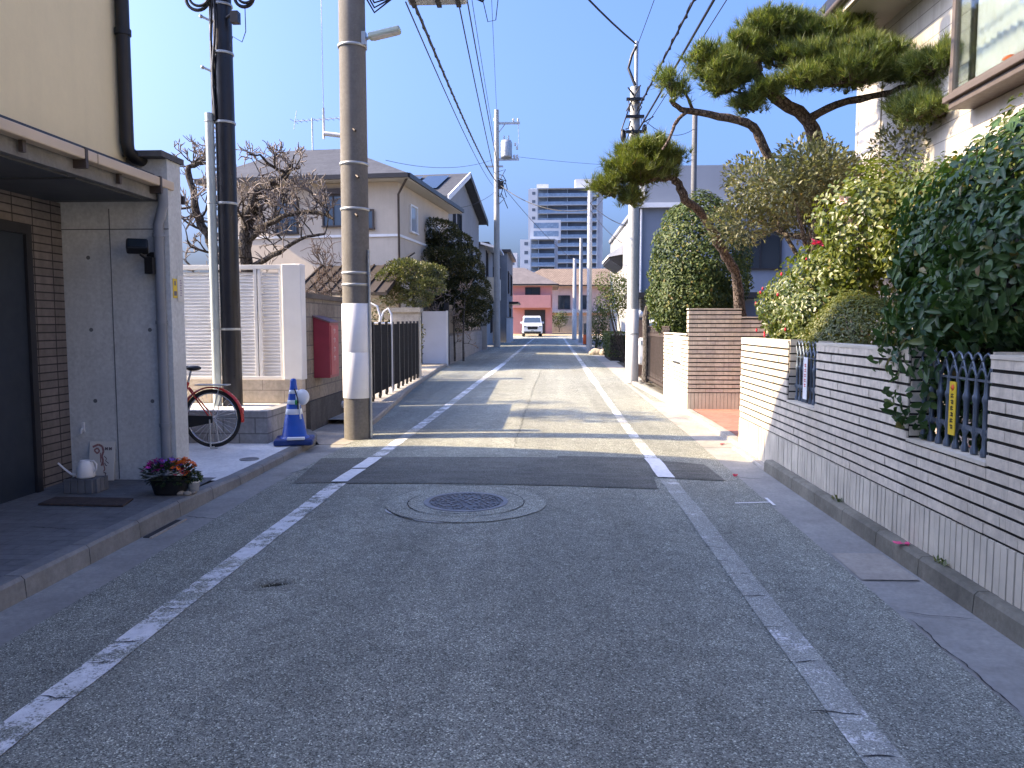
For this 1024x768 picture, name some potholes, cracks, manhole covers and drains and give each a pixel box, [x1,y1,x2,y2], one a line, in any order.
pothole [245,578,302,591]
manhole cover [384,486,546,523]
